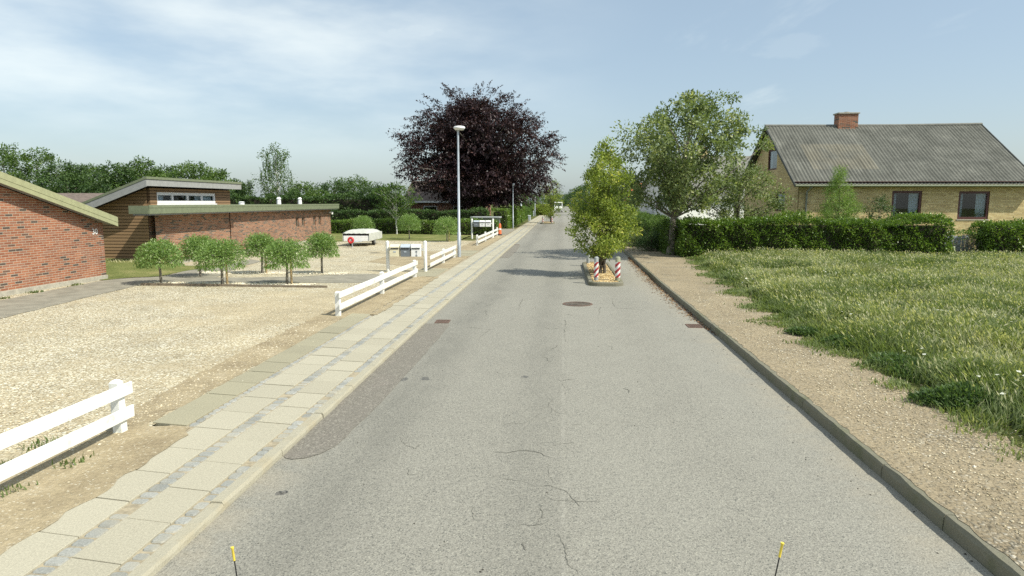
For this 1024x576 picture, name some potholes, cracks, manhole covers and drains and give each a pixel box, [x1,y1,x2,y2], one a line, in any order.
crack [495,450,600,574]
